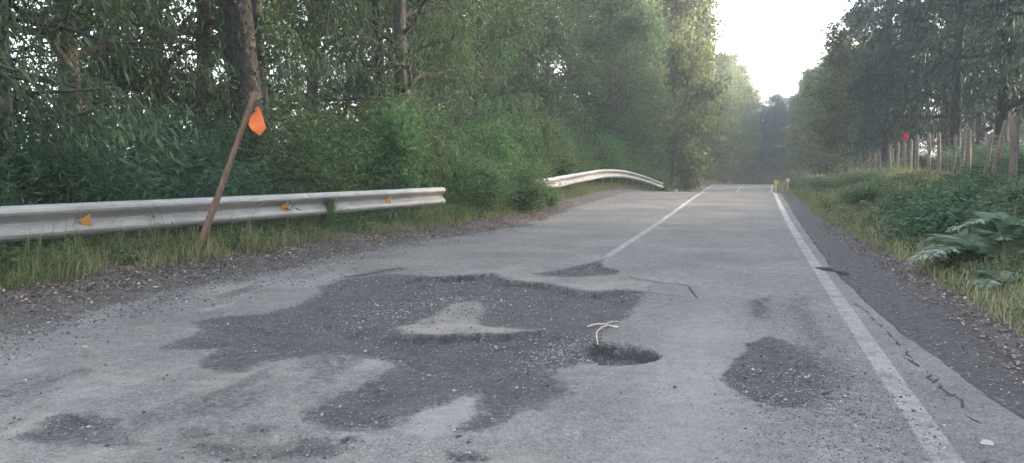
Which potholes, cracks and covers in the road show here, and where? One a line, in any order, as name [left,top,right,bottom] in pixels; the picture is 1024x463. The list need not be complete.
pothole [161,274,645,431]
pothole [585,341,663,366]
crack [855,303,982,424]
